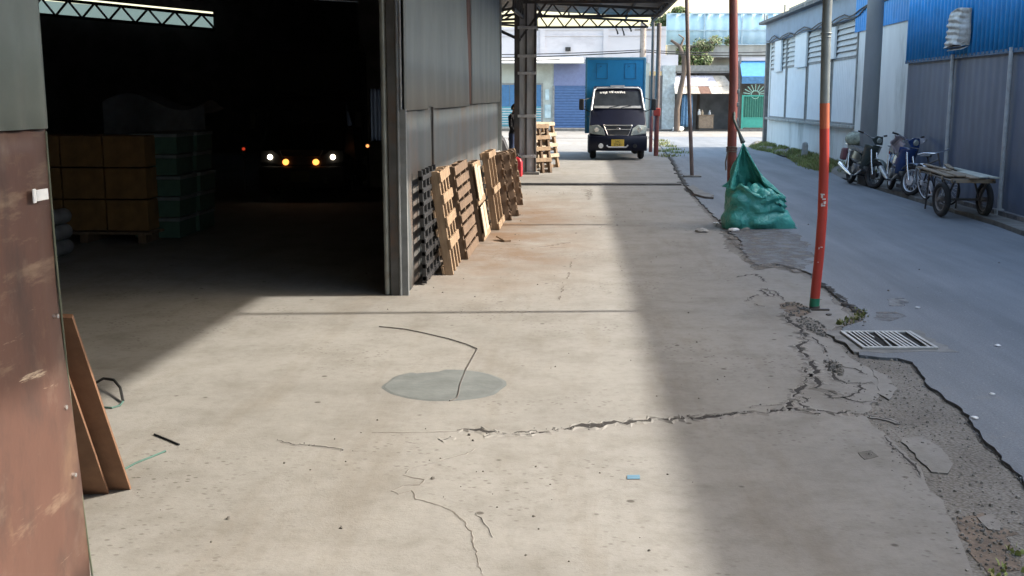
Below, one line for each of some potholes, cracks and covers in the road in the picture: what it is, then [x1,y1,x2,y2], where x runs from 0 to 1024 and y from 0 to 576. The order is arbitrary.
crack [275,439,344,451]
crack [539,242,573,300]
pothole [957,512,1022,573]
crack [372,274,923,576]
drain grate [826,330,958,354]
